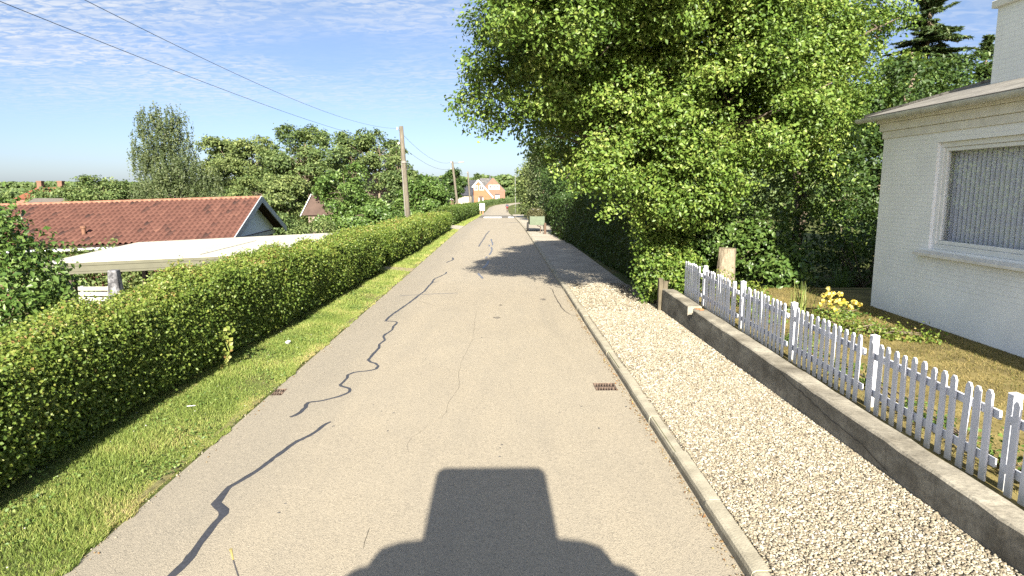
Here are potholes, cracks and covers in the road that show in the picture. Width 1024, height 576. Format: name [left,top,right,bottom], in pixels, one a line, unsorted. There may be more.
drain grate [593,383,617,391]
